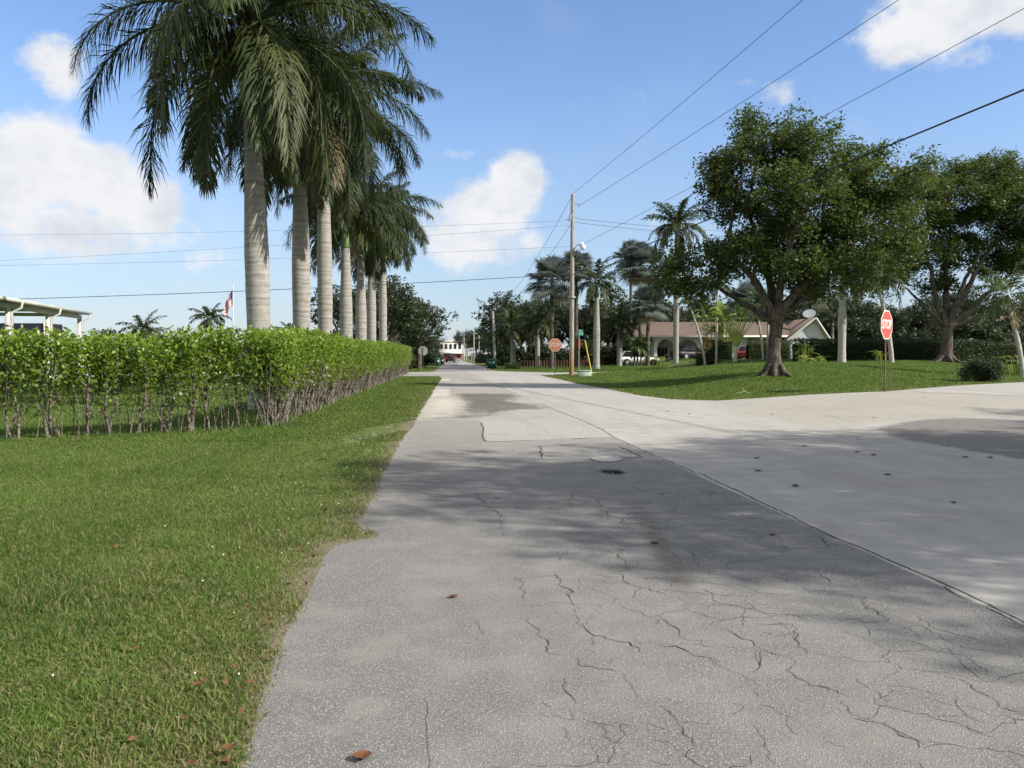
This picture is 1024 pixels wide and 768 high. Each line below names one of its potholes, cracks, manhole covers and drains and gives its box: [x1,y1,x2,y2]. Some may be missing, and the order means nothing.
crack [503,455,1024,768]
